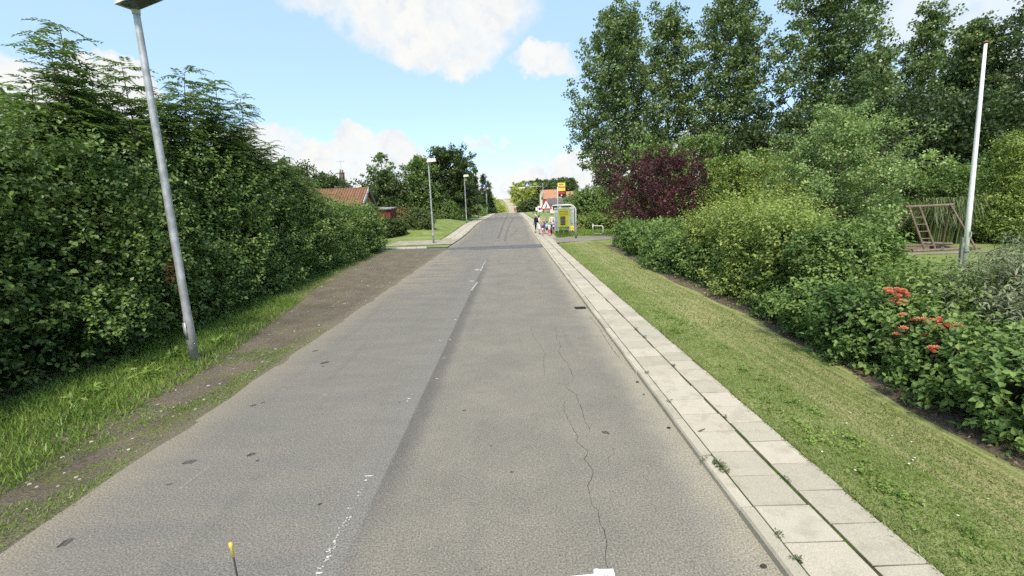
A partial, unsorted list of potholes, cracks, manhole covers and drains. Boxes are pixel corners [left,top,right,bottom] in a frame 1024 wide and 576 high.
crack [556,333,614,568]
